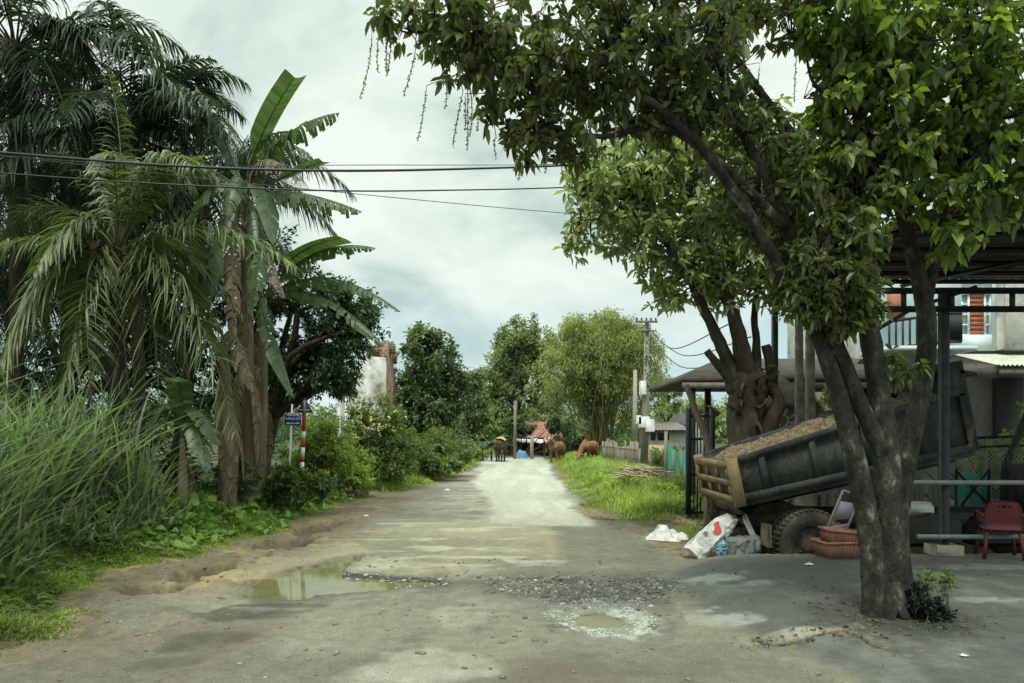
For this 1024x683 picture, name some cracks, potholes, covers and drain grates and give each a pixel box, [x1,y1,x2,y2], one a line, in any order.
pothole [242,554,453,601]
pothole [542,599,660,640]
